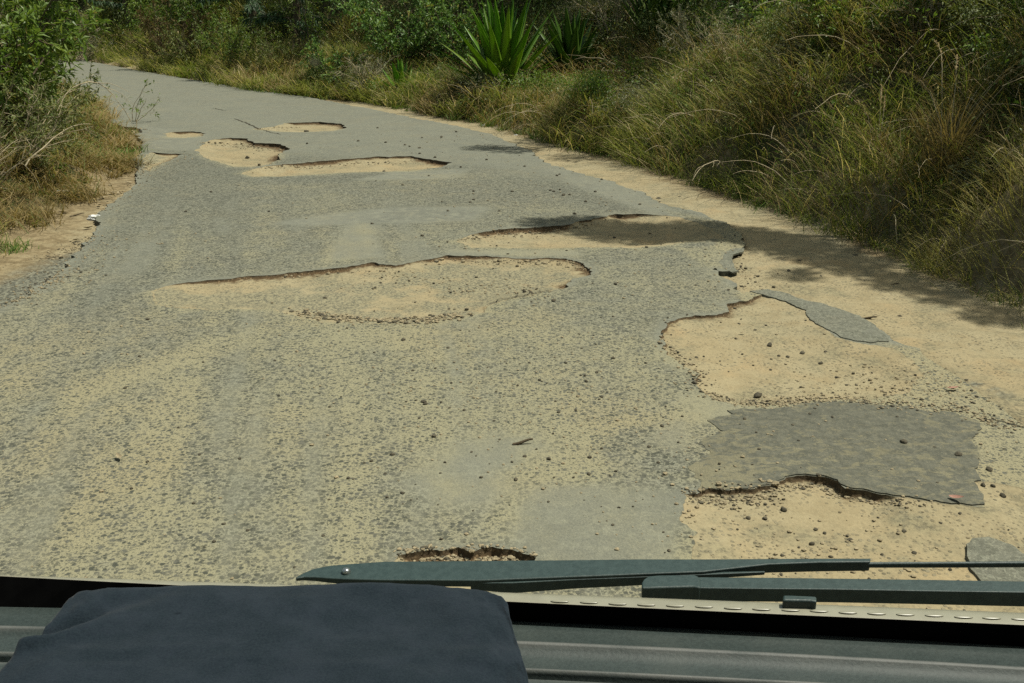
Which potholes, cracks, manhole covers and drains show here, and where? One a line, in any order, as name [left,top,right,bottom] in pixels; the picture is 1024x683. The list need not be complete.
pothole [151,255,592,324]
pothole [257,122,347,132]
pothole [679,475,1024,613]
pothole [242,156,452,177]
pothole [195,138,290,167]
pothole [660,295,924,406]
pothole [456,214,725,249]
